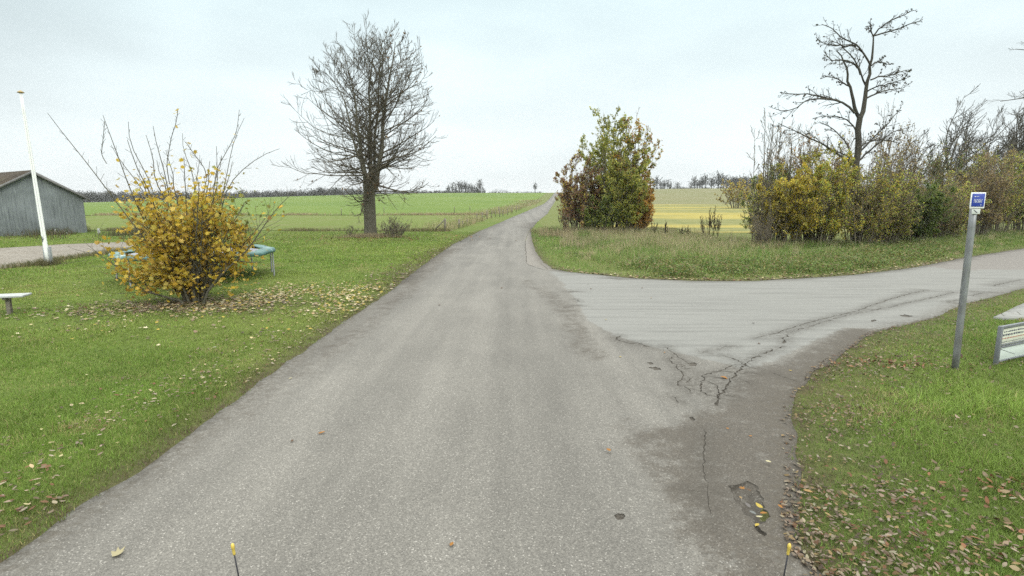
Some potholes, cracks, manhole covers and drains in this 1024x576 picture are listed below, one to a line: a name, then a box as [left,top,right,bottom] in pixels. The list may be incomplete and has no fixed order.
crack [616,280,1018,406]
pothole [728,481,771,524]
crack [691,429,713,517]
